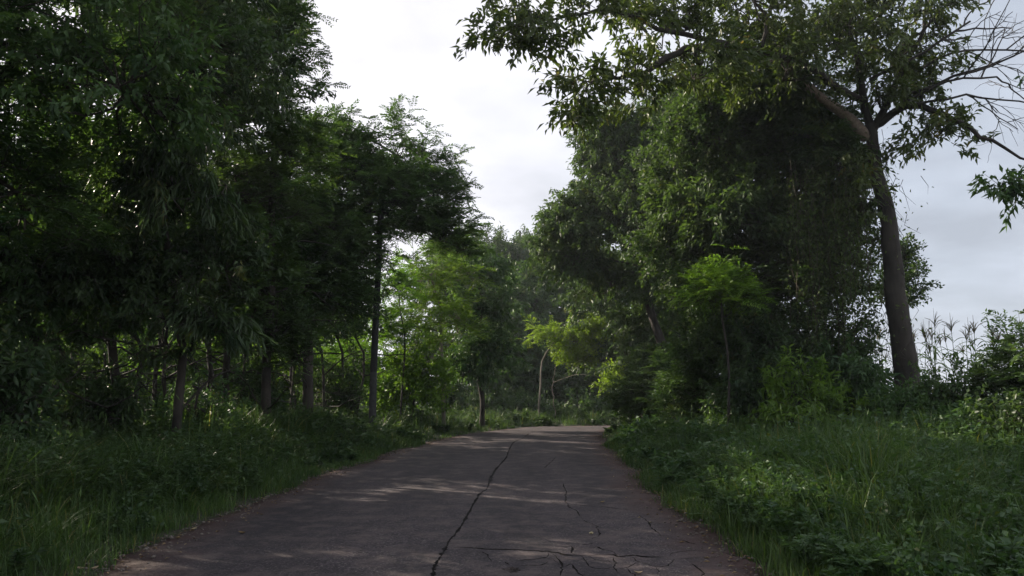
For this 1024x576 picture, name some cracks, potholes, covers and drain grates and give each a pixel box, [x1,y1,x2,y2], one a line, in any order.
crack [430,433,739,576]
